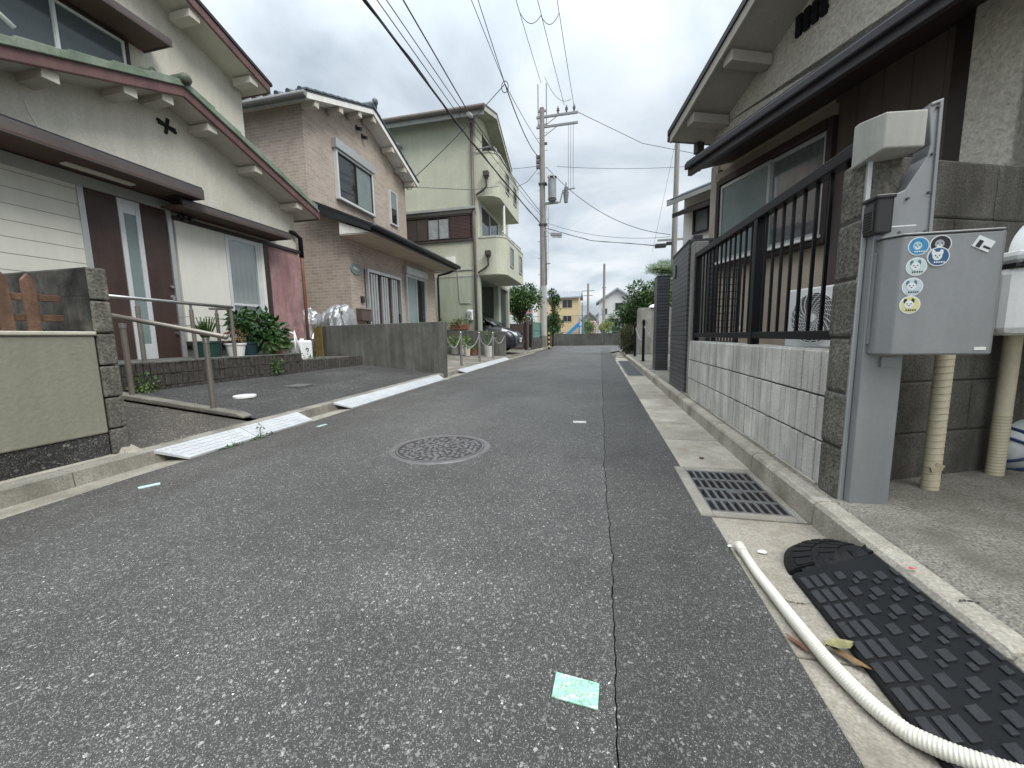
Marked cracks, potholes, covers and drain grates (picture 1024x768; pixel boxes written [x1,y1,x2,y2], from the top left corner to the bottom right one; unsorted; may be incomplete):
drain grate [674,466,808,525]
crack [601,358,620,768]
manhole cover [388,435,491,465]
